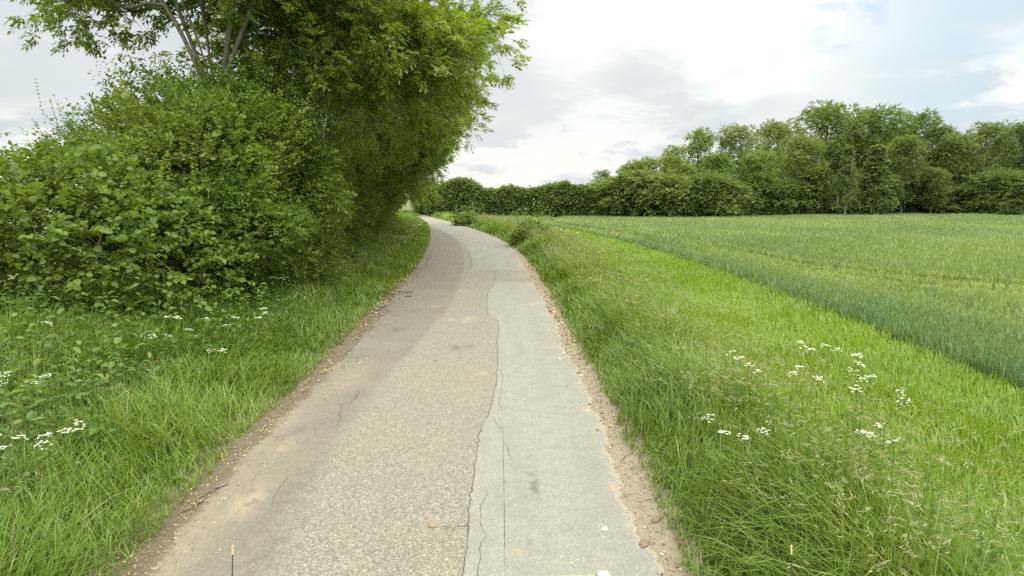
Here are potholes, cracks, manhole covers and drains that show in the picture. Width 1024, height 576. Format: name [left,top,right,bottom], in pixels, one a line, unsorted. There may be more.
crack [453,369,511,576]
